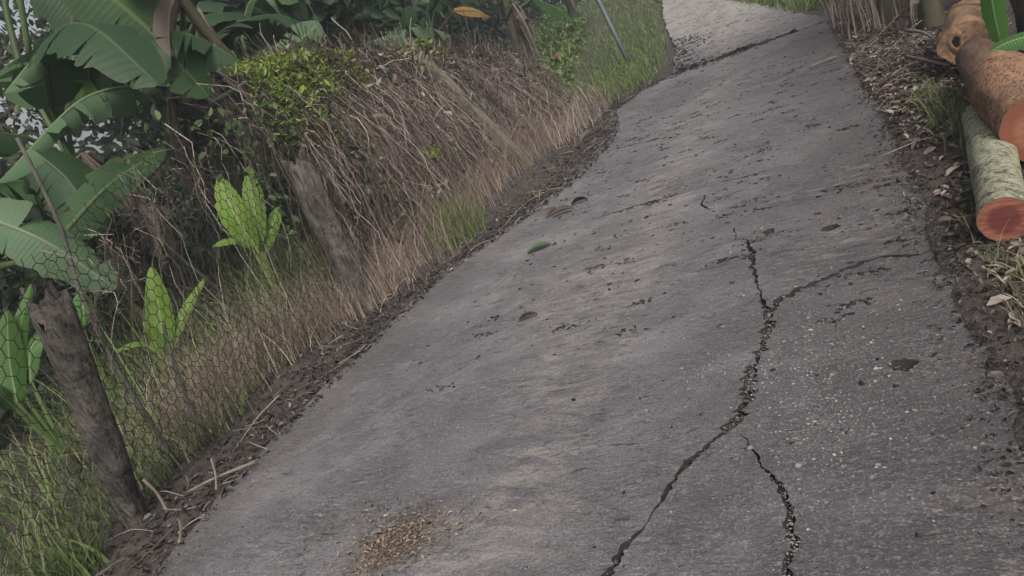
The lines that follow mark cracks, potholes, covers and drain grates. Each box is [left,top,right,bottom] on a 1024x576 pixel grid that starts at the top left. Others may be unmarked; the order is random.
crack [601,228,930,576]
